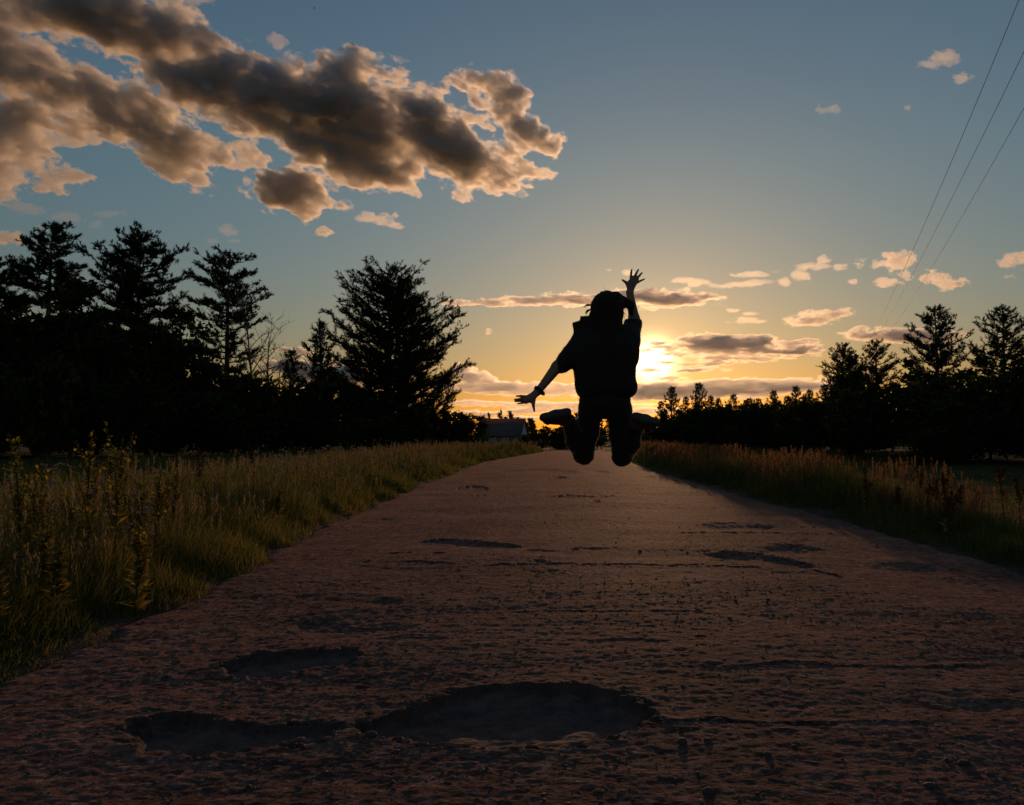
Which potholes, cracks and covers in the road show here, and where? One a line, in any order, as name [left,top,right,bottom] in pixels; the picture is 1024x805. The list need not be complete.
pothole [112,710,350,758]
pothole [206,645,364,681]
pothole [759,543,829,556]
pothole [704,550,819,571]
pothole [697,522,794,532]
pothole [351,680,668,752]
pothole [413,538,521,549]
